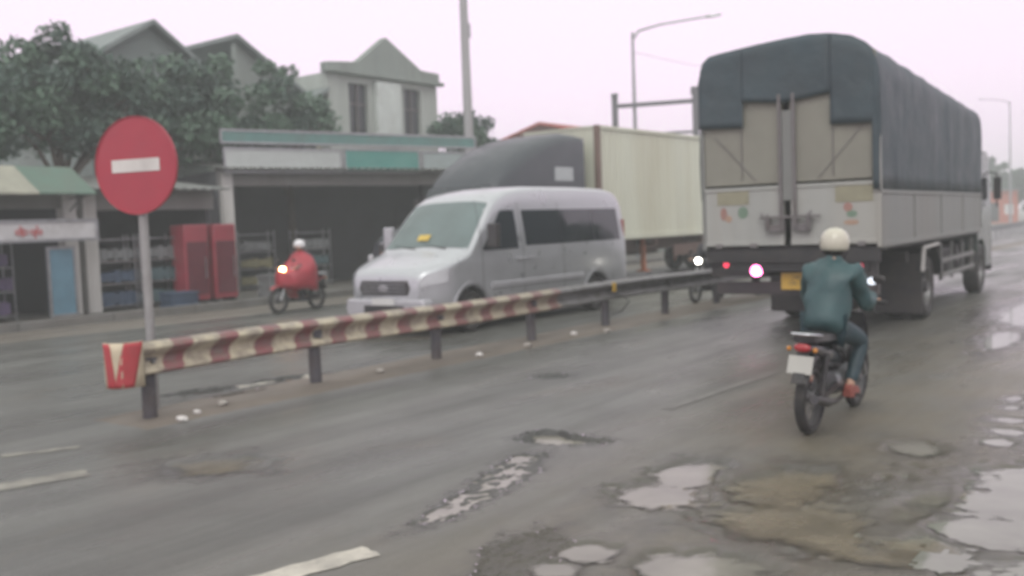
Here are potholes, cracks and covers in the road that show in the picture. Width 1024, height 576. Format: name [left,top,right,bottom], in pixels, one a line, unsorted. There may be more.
pothole [511,428,618,446]
